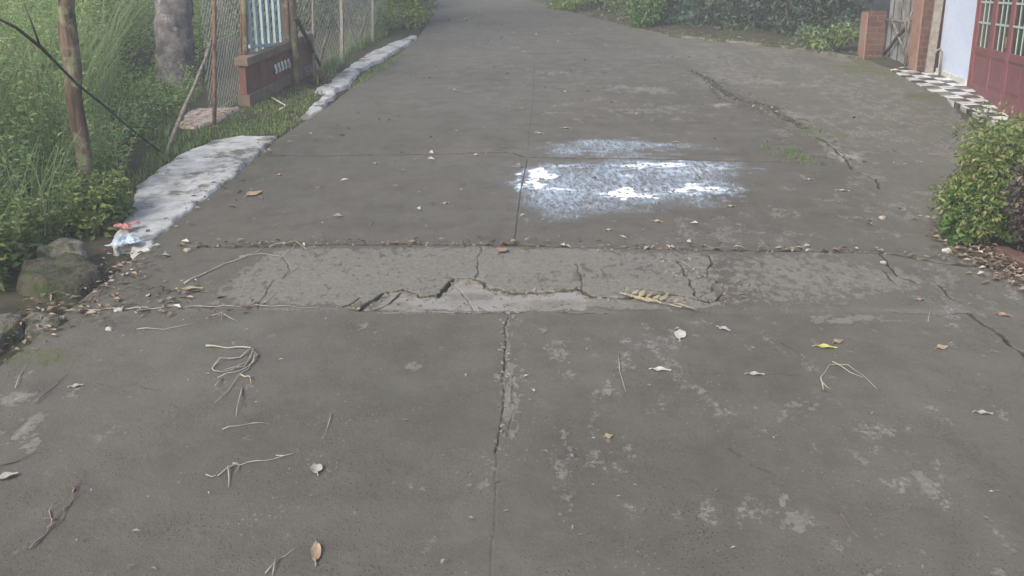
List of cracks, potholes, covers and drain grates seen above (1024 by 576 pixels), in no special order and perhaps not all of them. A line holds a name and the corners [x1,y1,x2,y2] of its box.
crack [171,240,1024,576]
crack [680,68,886,190]
